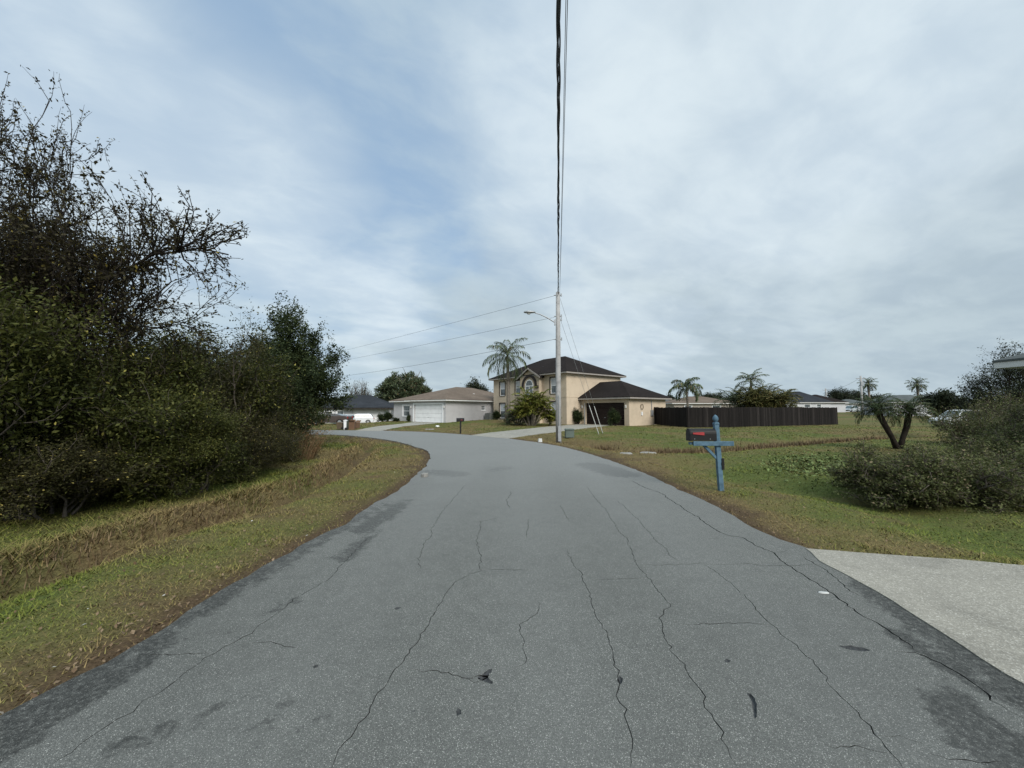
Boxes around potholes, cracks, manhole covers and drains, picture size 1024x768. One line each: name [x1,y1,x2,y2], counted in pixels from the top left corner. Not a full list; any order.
crack [332,518,519,766]
crack [560,506,633,767]
crack [586,481,1006,768]
